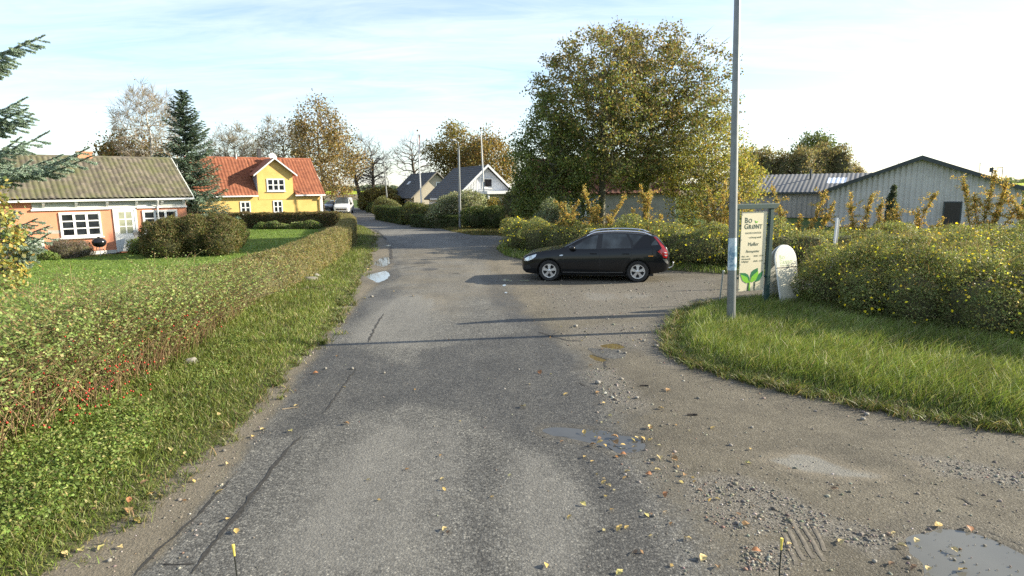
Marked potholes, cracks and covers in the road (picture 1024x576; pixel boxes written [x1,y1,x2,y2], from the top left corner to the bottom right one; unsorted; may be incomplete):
pothole [892,524,1024,576]
crack [134,437,301,576]
pothole [533,423,660,458]
pothole [360,270,400,284]
pothole [368,256,398,267]
crack [323,368,356,413]
